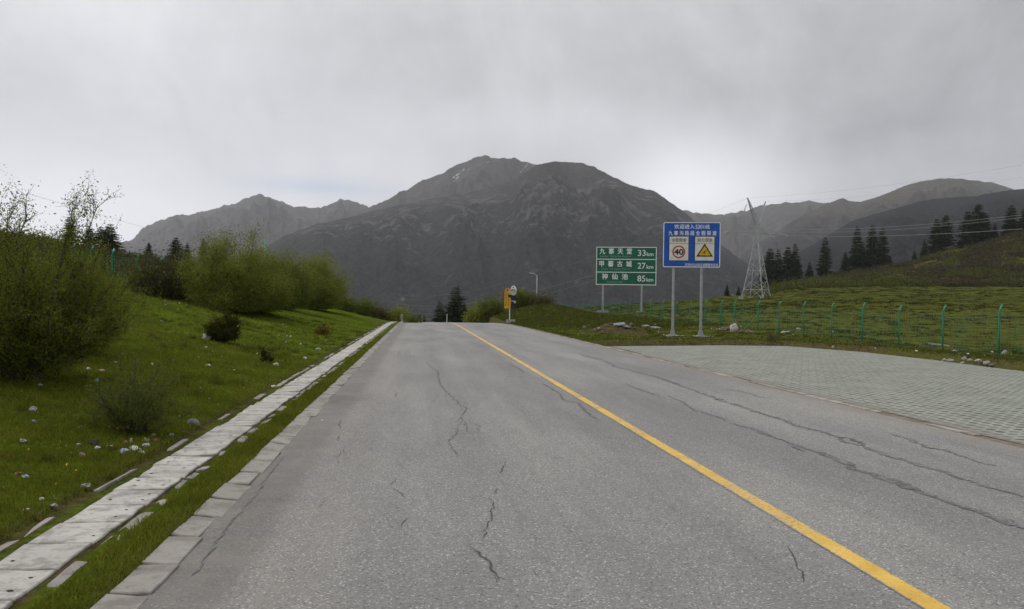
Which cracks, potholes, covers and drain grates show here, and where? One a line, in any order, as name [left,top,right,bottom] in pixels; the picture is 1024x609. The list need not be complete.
crack [543,383,597,420]
crack [627,383,725,420]
crack [429,367,480,458]
crack [471,461,506,582]
